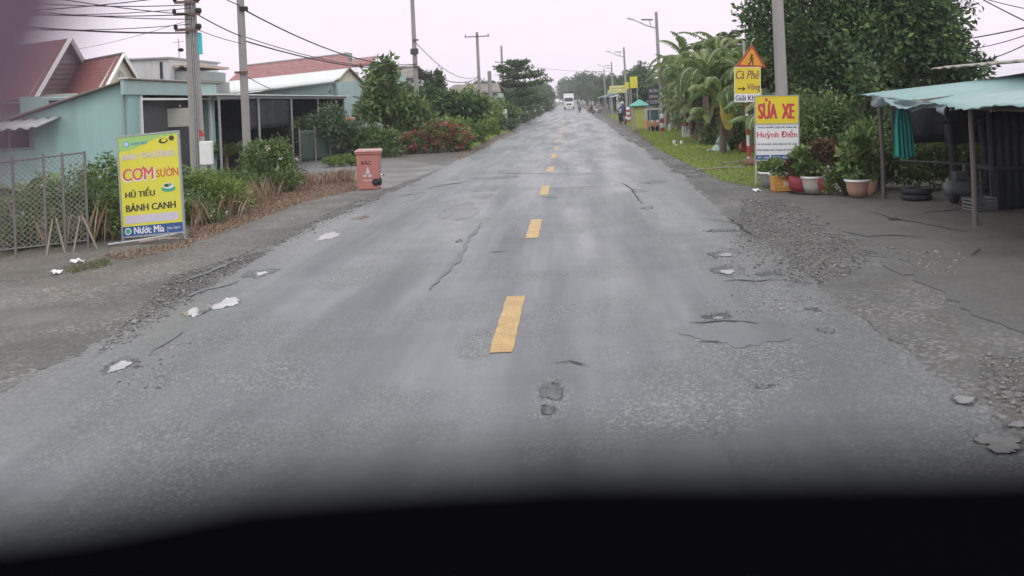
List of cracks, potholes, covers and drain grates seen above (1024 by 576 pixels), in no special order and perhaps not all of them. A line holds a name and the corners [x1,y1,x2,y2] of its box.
pothole [974,432,1024,449]
pothole [210,297,240,310]
pothole [950,393,978,406]
pothole [100,356,140,375]
pothole [707,247,743,258]
pothole [538,381,564,401]
pothole [241,267,280,278]
pothole [541,403,558,415]
pothole [700,310,731,320]
crack [429,222,498,289]
pothole [182,302,213,318]
pothole [316,232,343,241]
